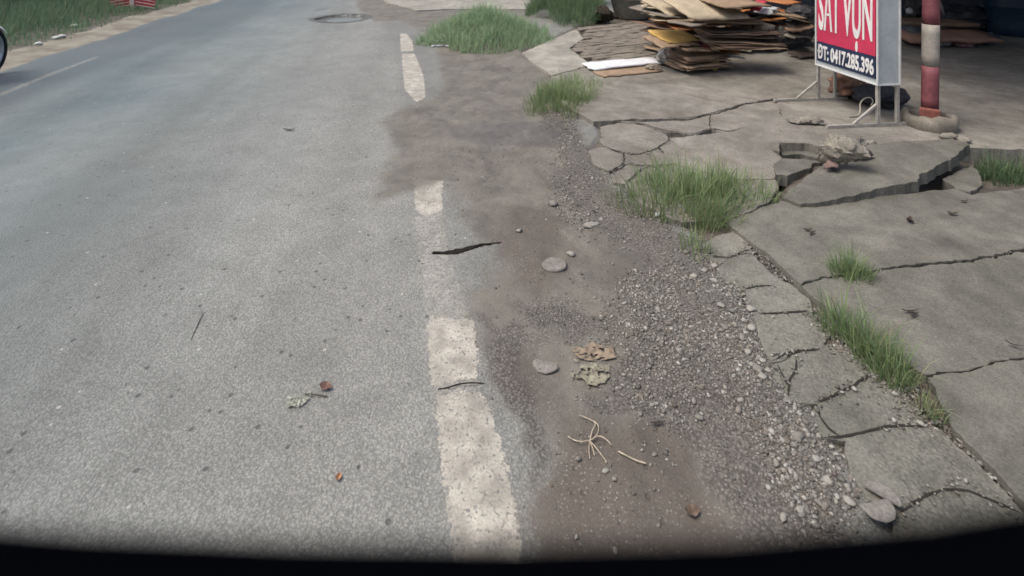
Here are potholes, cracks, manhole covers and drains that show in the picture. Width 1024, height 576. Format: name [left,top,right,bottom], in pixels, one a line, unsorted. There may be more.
crack [804,250,1024,284]
crack [432,242,501,255]
crack [438,382,484,390]
crack [610,99,771,180]
